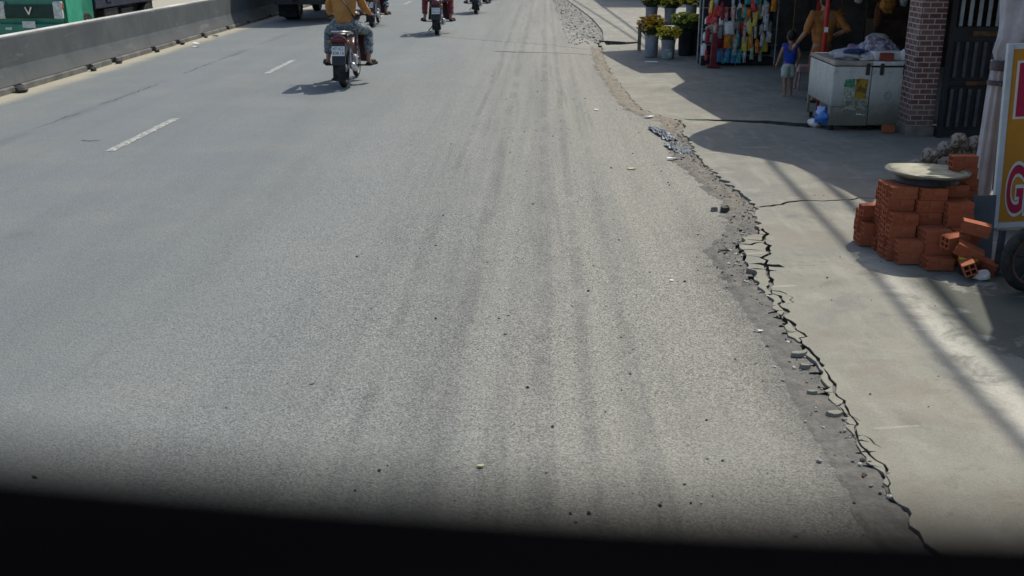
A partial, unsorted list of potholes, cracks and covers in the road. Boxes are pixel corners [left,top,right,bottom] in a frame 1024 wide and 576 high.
crack [735,229,897,504]
